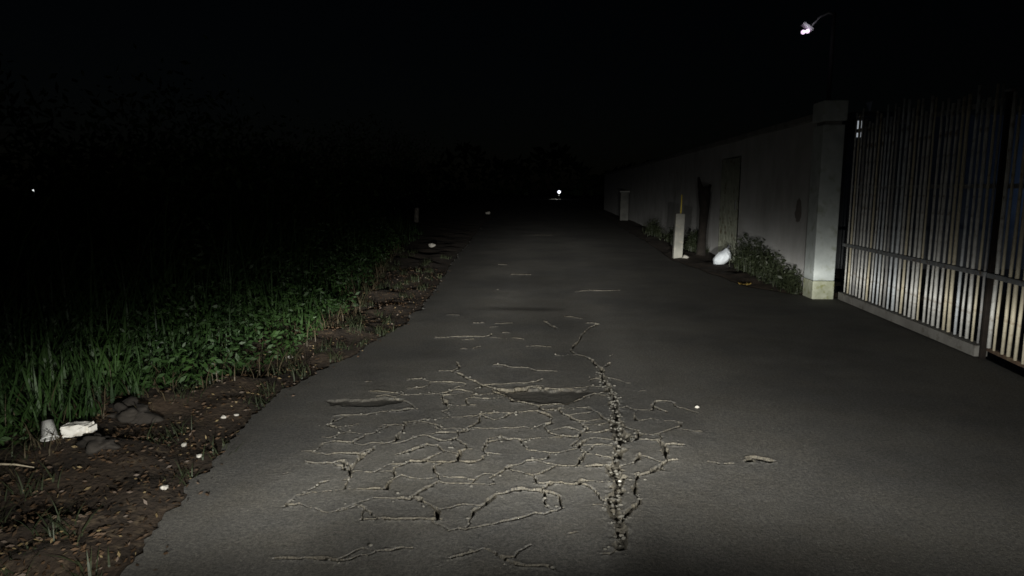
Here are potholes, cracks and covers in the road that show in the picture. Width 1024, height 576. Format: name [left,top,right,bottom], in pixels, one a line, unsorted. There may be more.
crack [707,455,777,465]
pothole [324,397,407,407]
pothole [499,387,594,405]
crack [274,323,702,570]
crack [435,314,523,349]
